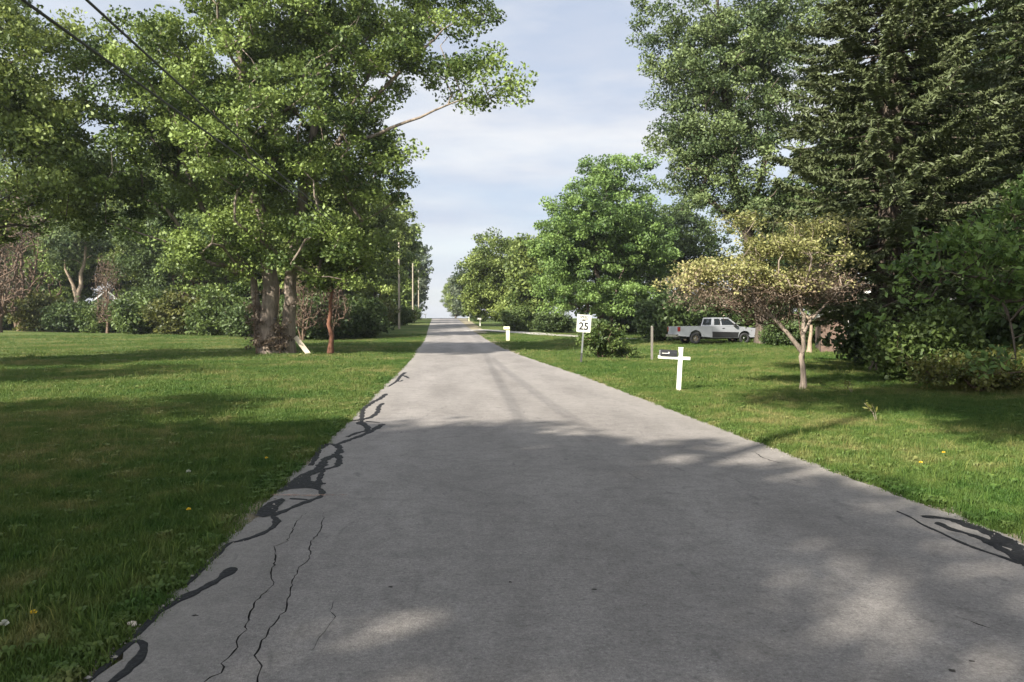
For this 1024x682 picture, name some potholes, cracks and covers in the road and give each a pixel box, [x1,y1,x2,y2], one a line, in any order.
crack [204,516,324,682]
